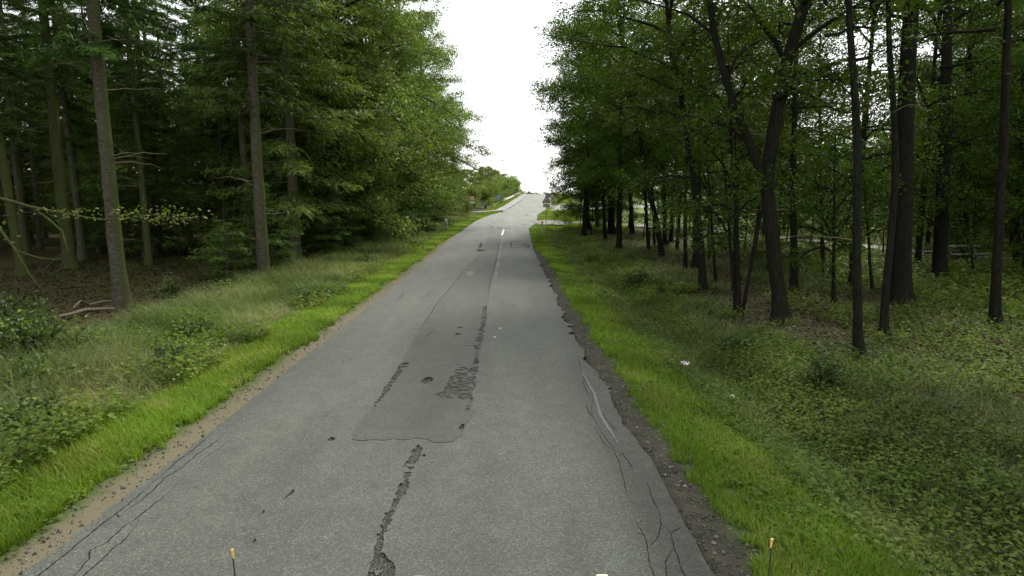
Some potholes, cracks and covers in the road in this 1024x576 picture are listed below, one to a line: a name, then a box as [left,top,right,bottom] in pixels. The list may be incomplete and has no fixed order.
pothole [435,354,479,411]
crack [578,359,618,433]
crack [38,440,230,576]
crack [632,483,685,576]
